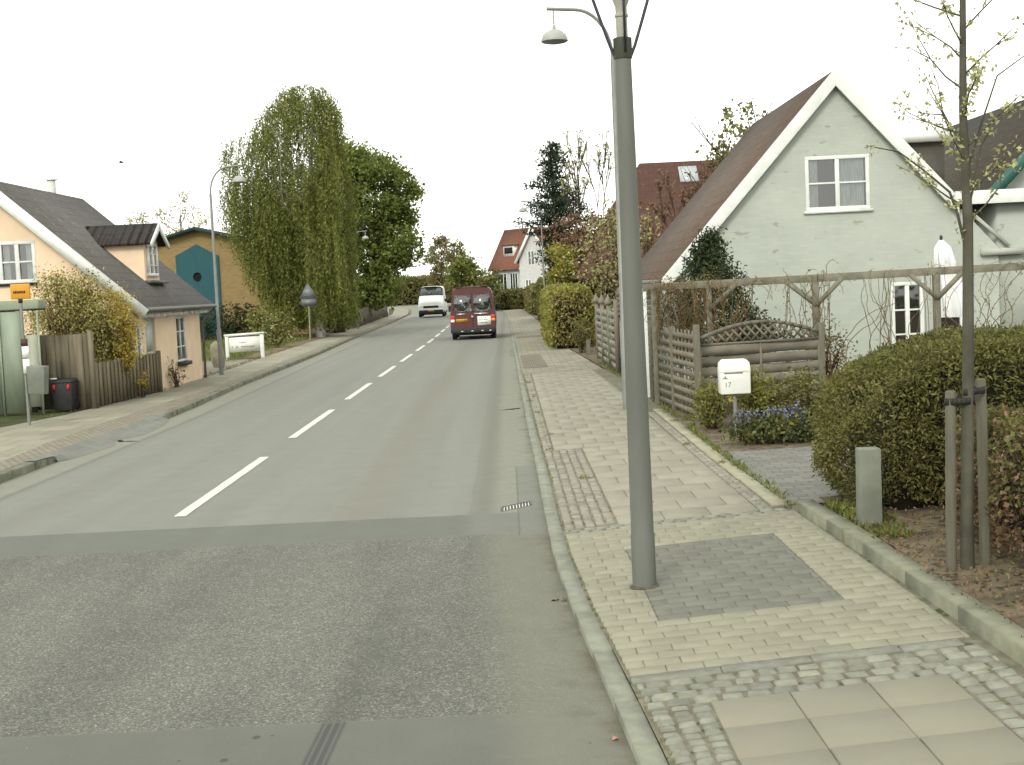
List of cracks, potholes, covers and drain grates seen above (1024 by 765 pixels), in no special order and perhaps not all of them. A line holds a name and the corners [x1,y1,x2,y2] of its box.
drain grate [501,500,532,512]
